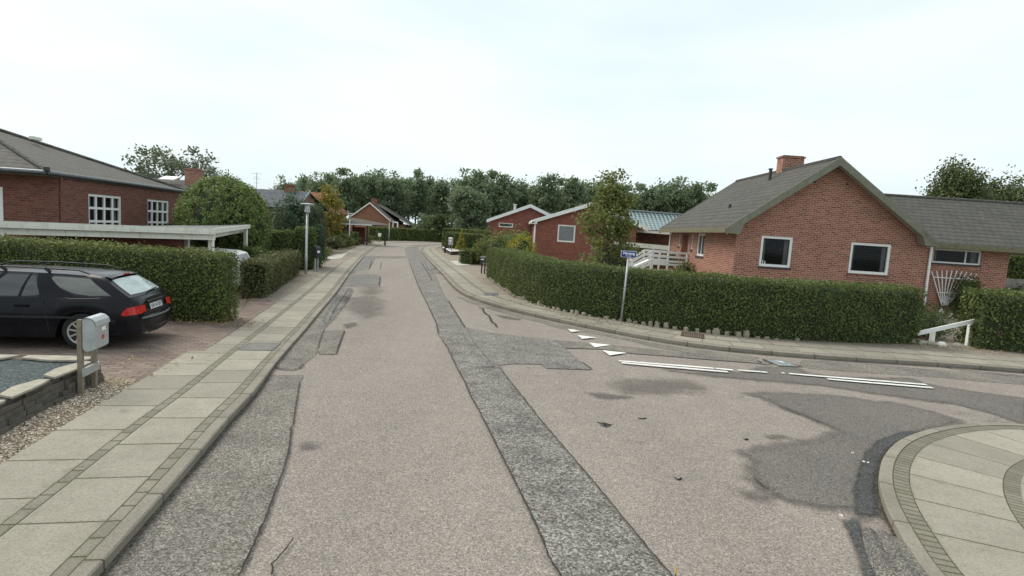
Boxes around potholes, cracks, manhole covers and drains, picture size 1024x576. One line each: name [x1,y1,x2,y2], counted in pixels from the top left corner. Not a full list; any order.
manhole cover [765,359,799,368]
crack [270,537,294,575]
